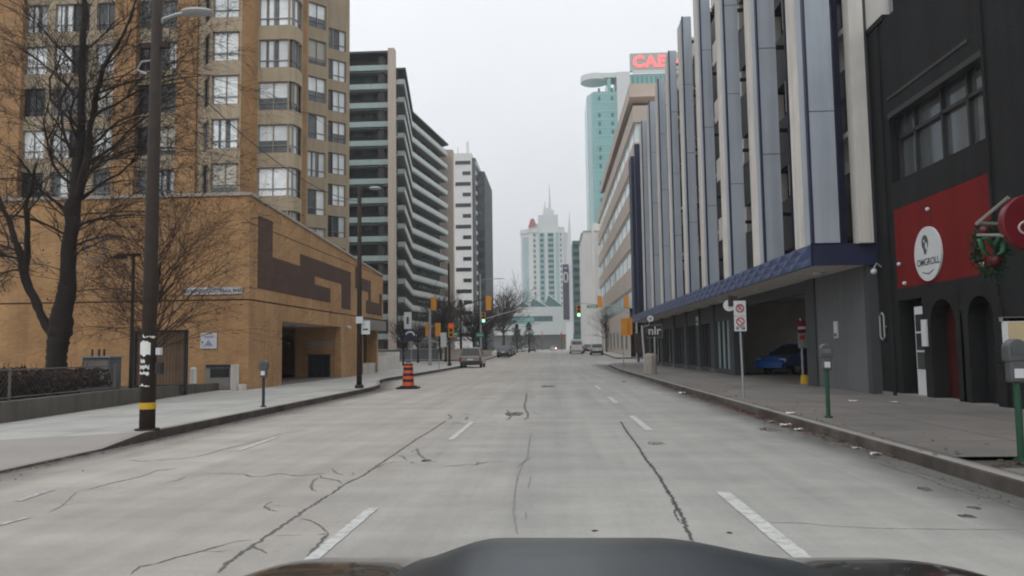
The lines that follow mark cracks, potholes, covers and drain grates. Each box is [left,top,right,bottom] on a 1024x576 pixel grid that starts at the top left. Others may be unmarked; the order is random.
crack [49,432,286,512]
crack [620,421,694,542]
crack [131,413,489,574]
crack [491,393,541,533]
